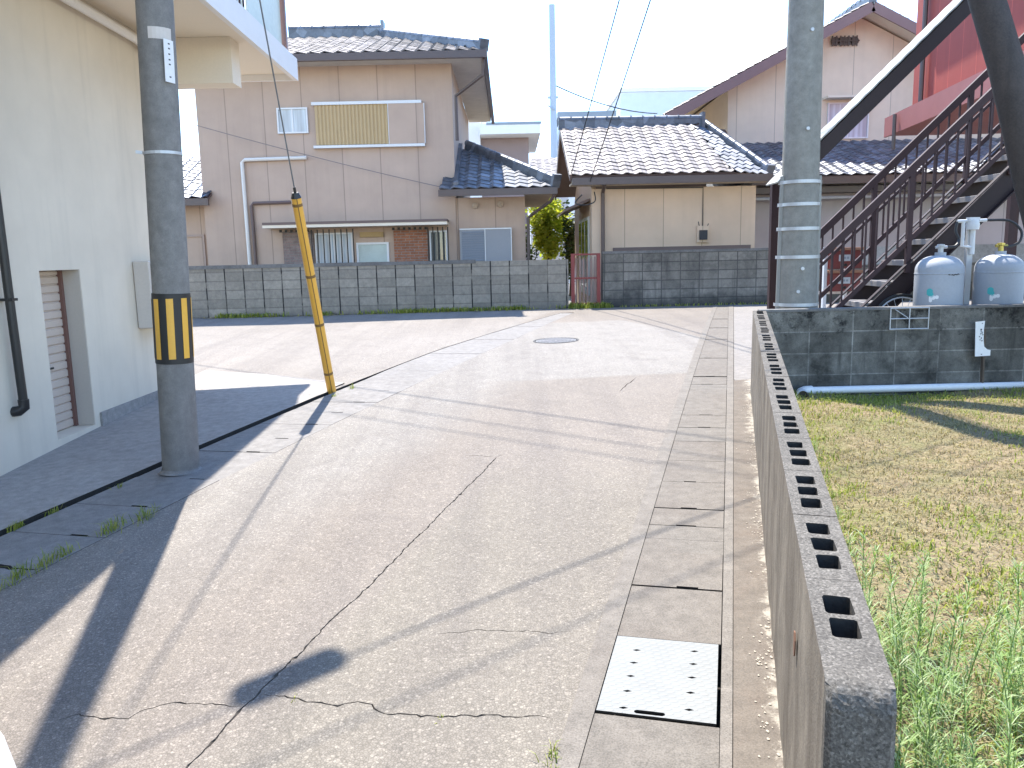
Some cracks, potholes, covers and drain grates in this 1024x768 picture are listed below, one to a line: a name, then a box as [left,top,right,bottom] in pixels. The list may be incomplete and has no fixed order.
crack [63,455,548,768]
